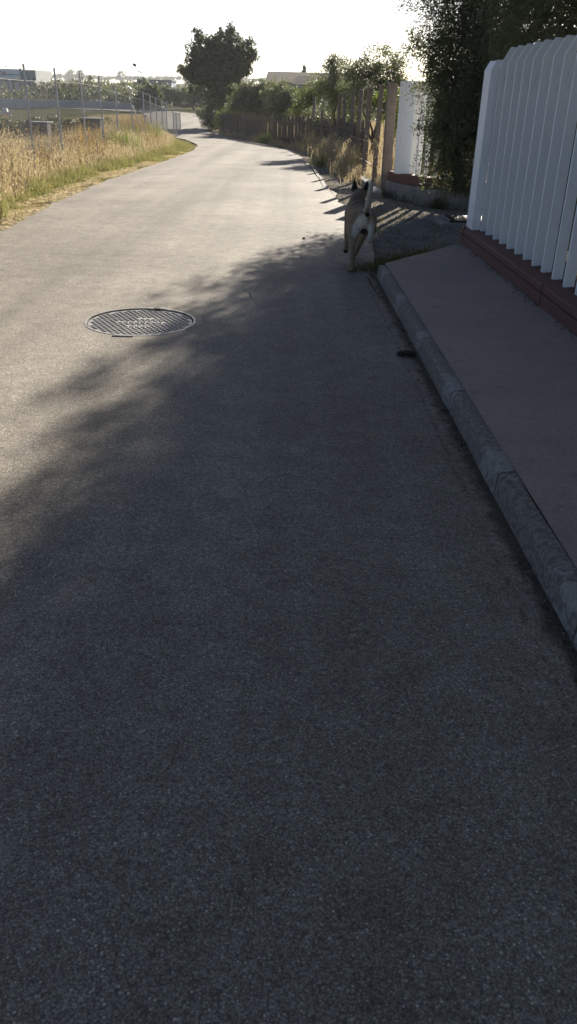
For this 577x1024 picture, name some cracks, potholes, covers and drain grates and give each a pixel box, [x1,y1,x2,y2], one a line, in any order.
manhole cover [85,307,196,337]
